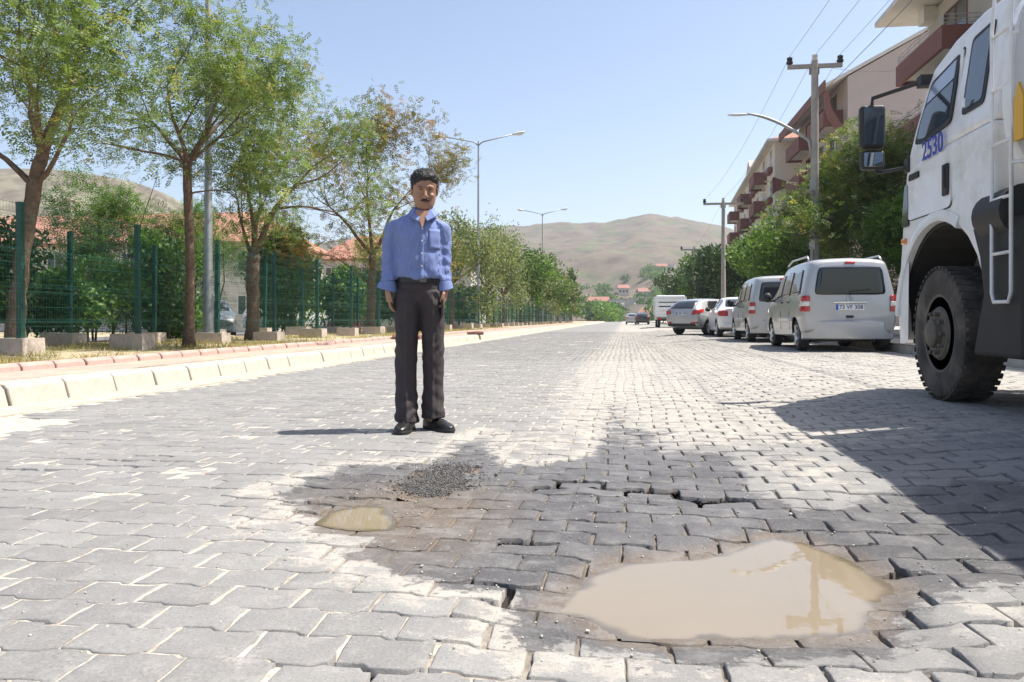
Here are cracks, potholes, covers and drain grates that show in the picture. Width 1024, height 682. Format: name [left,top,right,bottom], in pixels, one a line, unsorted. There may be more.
pothole [388,465,481,501]
